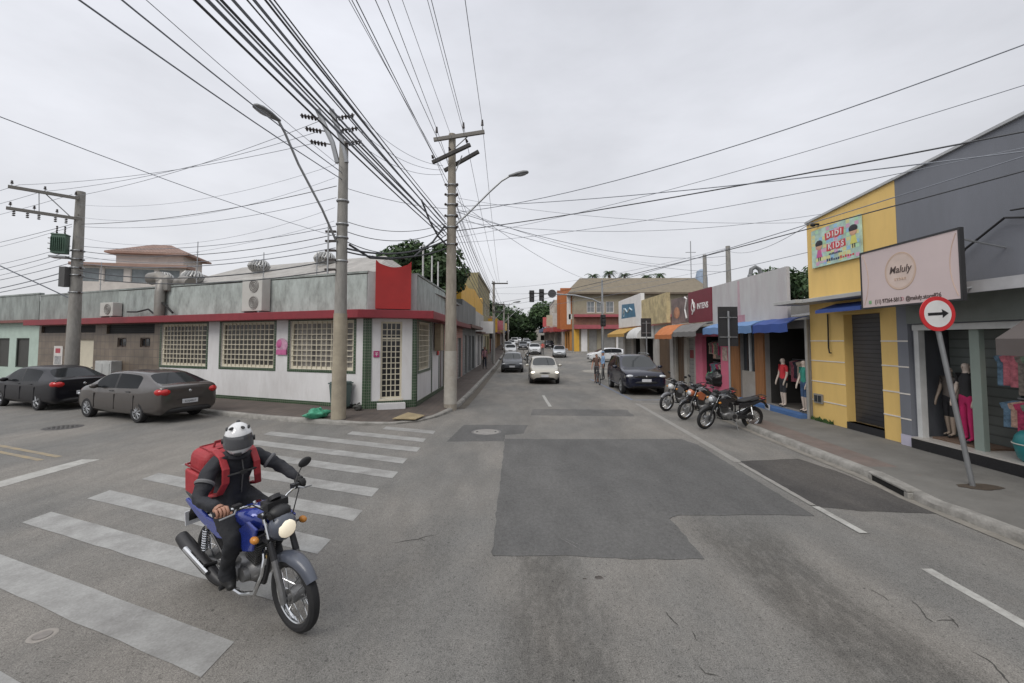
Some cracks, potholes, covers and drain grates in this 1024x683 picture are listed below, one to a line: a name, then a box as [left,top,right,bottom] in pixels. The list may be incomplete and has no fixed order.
drain grate [868,471,922,499]
manhole cover [25,628,59,643]
